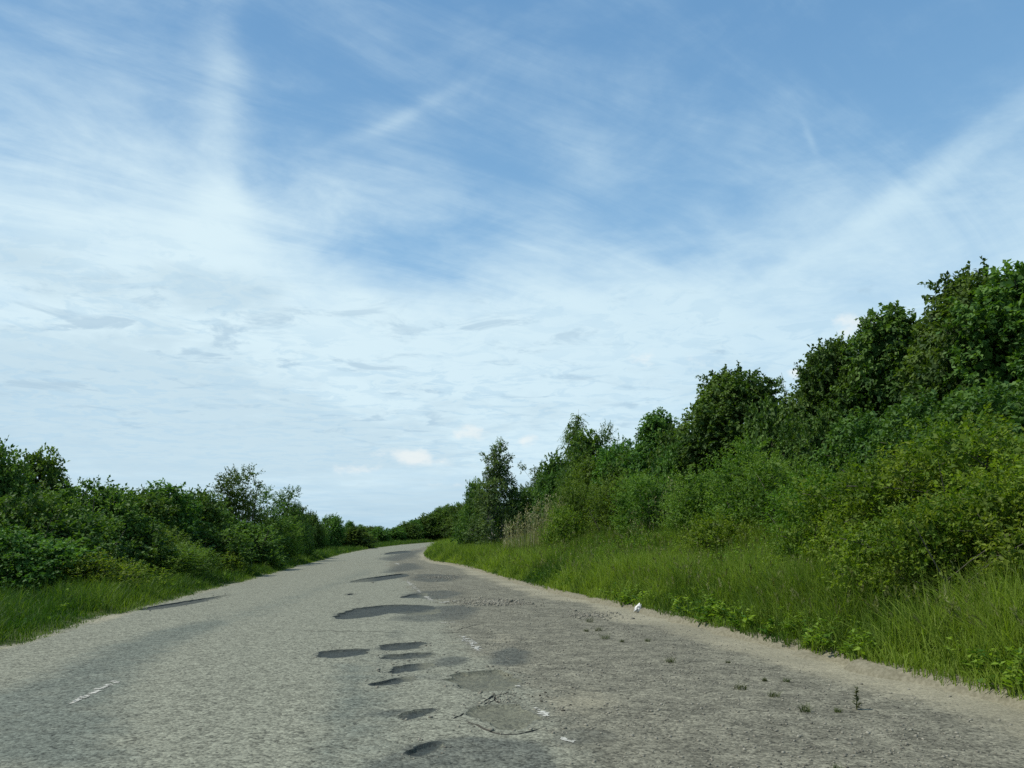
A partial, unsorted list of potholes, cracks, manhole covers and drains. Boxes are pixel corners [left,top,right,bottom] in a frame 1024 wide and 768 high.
pothole [332,605,441,619]
pothole [404,741,444,757]
crack [453,692,540,735]
pothole [388,663,435,674]
pothole [350,574,409,583]
pothole [138,595,228,610]
pothole [367,676,415,686]
pothole [317,649,370,658]
pothole [397,708,436,720]
pothole [379,642,428,651]
